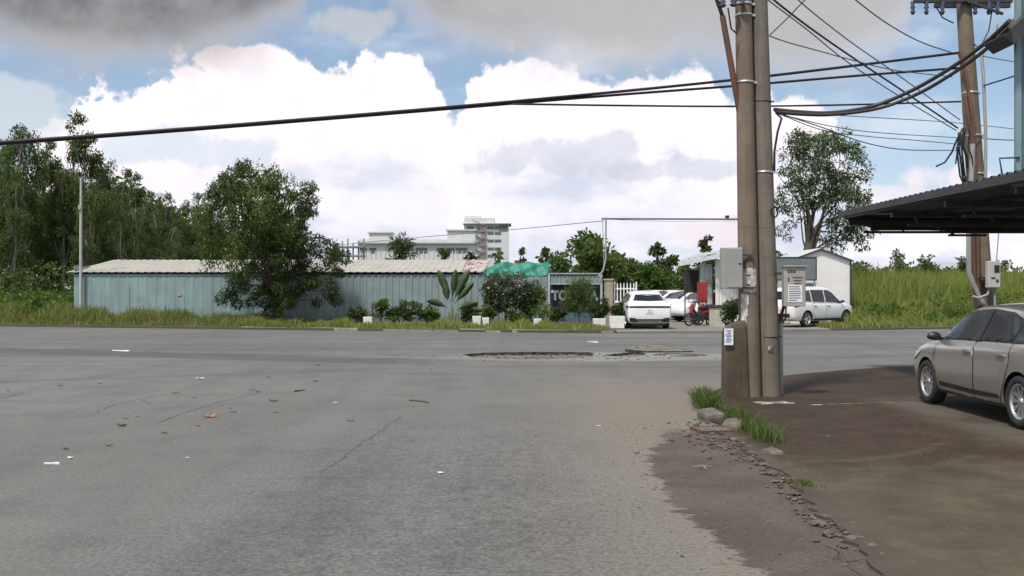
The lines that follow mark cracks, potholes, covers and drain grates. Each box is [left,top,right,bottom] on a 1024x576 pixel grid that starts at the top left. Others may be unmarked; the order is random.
crack [825,545,865,576]
